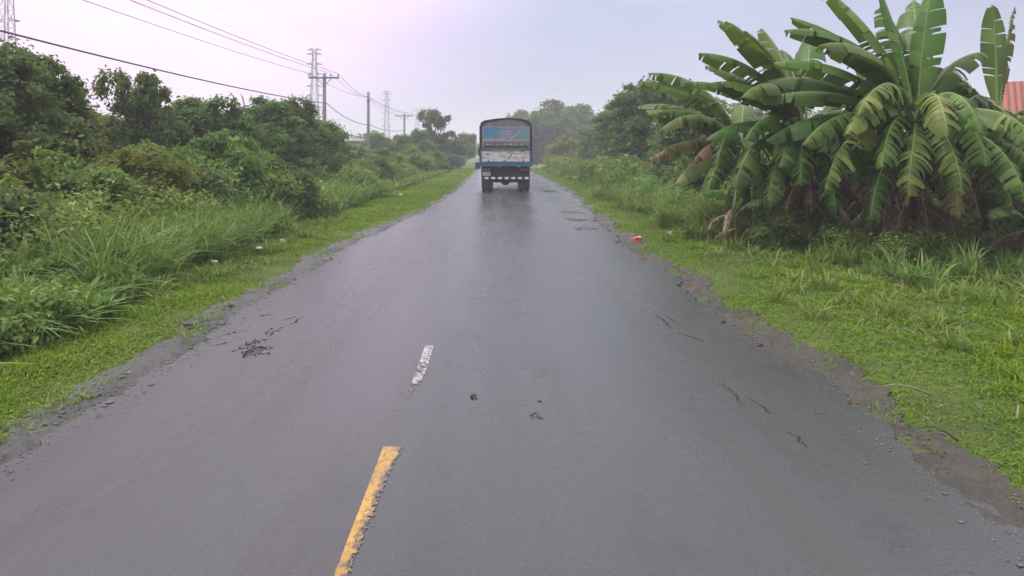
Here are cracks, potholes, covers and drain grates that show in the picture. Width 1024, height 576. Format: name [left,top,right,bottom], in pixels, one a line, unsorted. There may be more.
crack [722,384,773,415]
crack [787,432,807,447]
crack [656,315,704,342]
crack [214,314,302,358]
